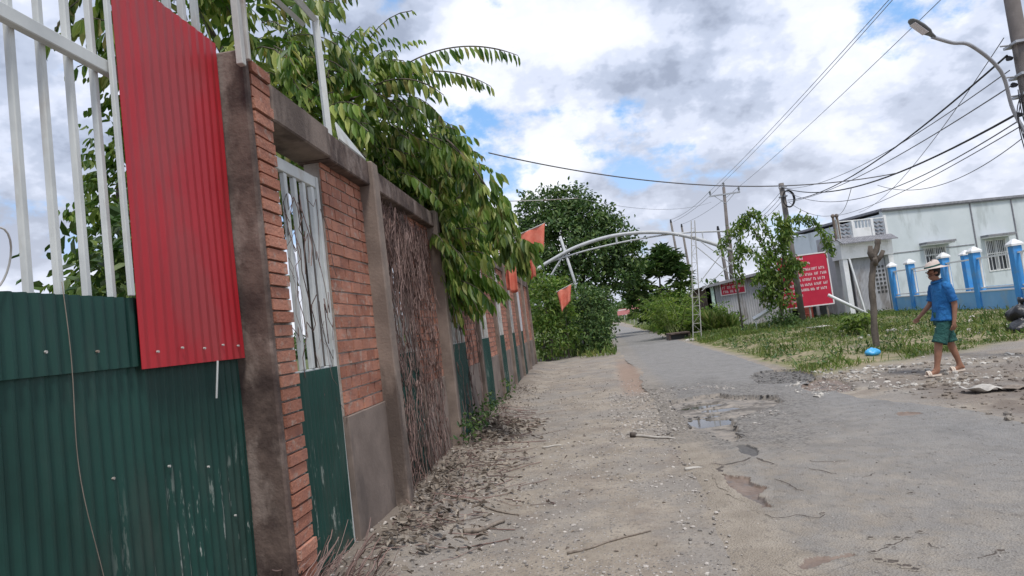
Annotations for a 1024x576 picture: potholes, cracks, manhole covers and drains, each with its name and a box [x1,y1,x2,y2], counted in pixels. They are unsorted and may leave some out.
crack [873,539,917,570]
crack [709,457,842,491]
pothole [729,442,768,459]
pothole [711,471,786,512]
pothole [662,393,789,443]
crack [977,550,1005,559]
pothole [746,370,815,385]
pothole [782,548,874,576]
